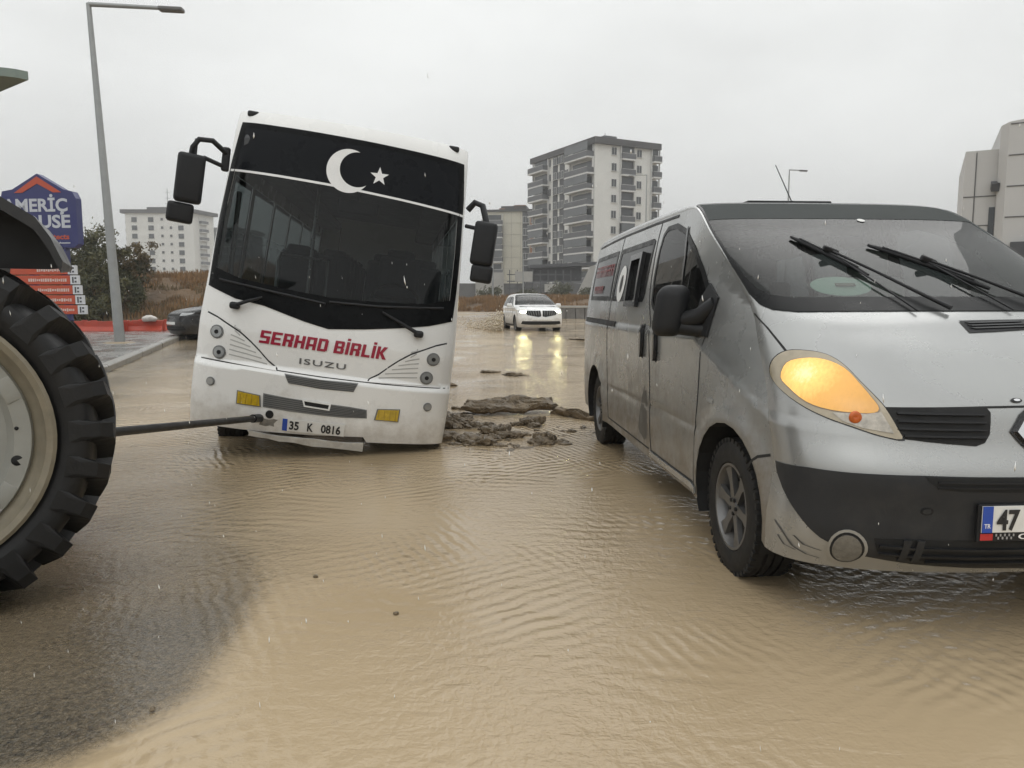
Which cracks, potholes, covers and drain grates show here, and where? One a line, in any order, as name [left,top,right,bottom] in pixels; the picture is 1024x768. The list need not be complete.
pothole [362,412,562,452]
